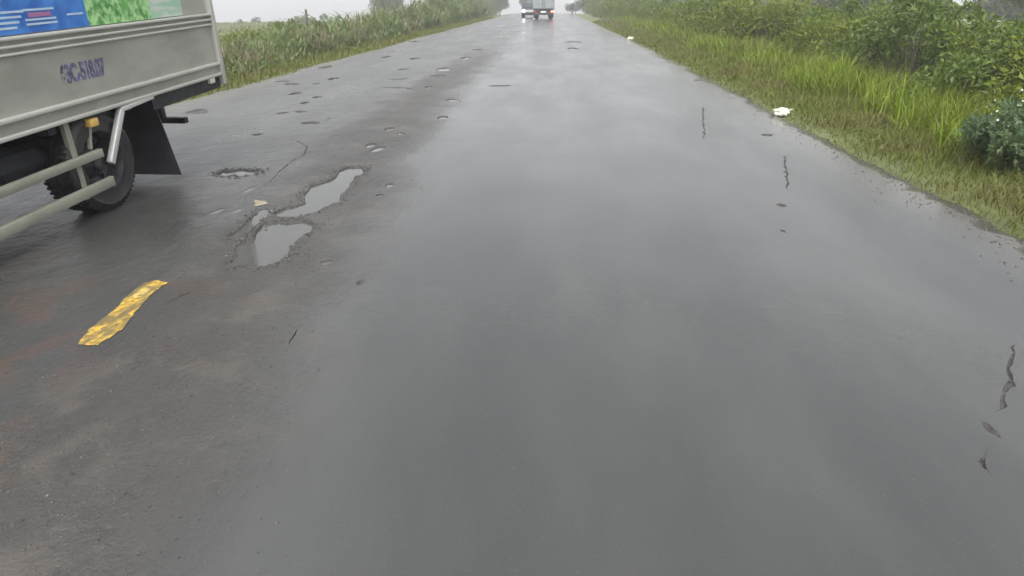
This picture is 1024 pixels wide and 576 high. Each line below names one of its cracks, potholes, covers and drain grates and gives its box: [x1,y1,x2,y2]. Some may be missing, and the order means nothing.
pothole [274,166,365,221]
pothole [229,220,316,266]
crack [995,345,1016,412]
pothole [227,209,273,239]
crack [270,139,308,182]
crack [979,448,990,474]
